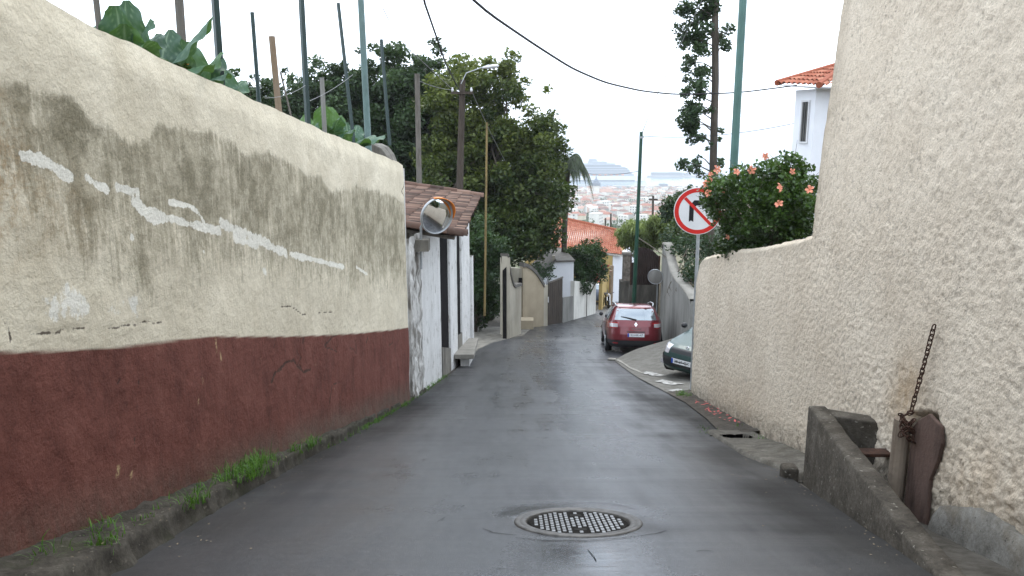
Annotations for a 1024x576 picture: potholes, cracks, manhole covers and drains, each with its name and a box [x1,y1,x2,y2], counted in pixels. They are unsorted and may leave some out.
manhole cover [514,507,643,538]
